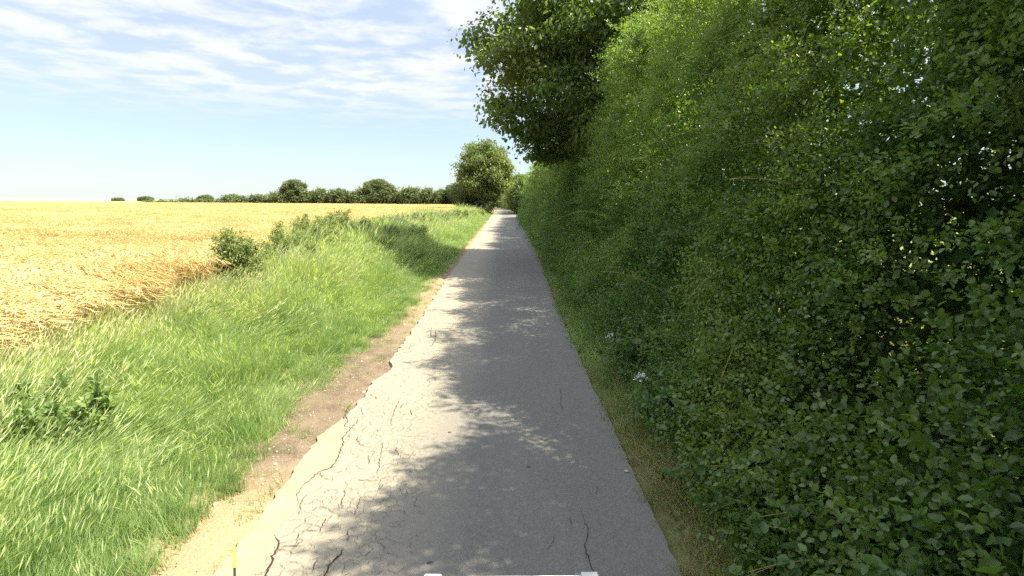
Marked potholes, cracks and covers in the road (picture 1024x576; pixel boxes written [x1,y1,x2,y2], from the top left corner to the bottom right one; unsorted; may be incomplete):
crack [255,389,455,576]
